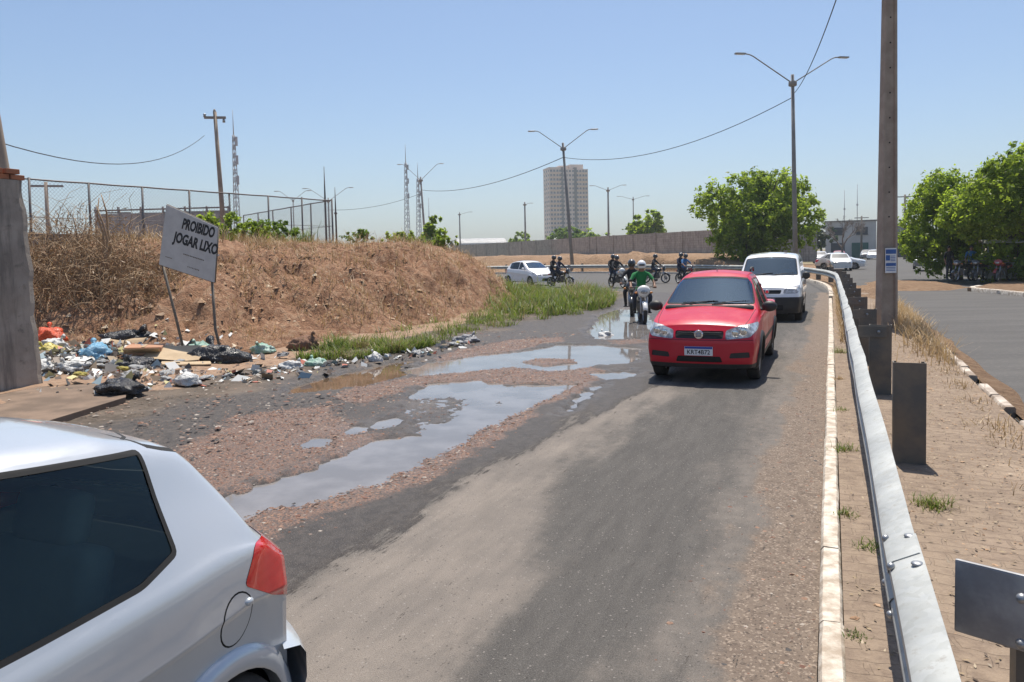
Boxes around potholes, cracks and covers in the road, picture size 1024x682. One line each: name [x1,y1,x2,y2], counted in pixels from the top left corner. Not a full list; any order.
pothole [583,368,641,380]
pothole [402,343,647,376]
pothole [583,308,655,339]
pothole [279,358,432,394]
pothole [221,379,580,520]
